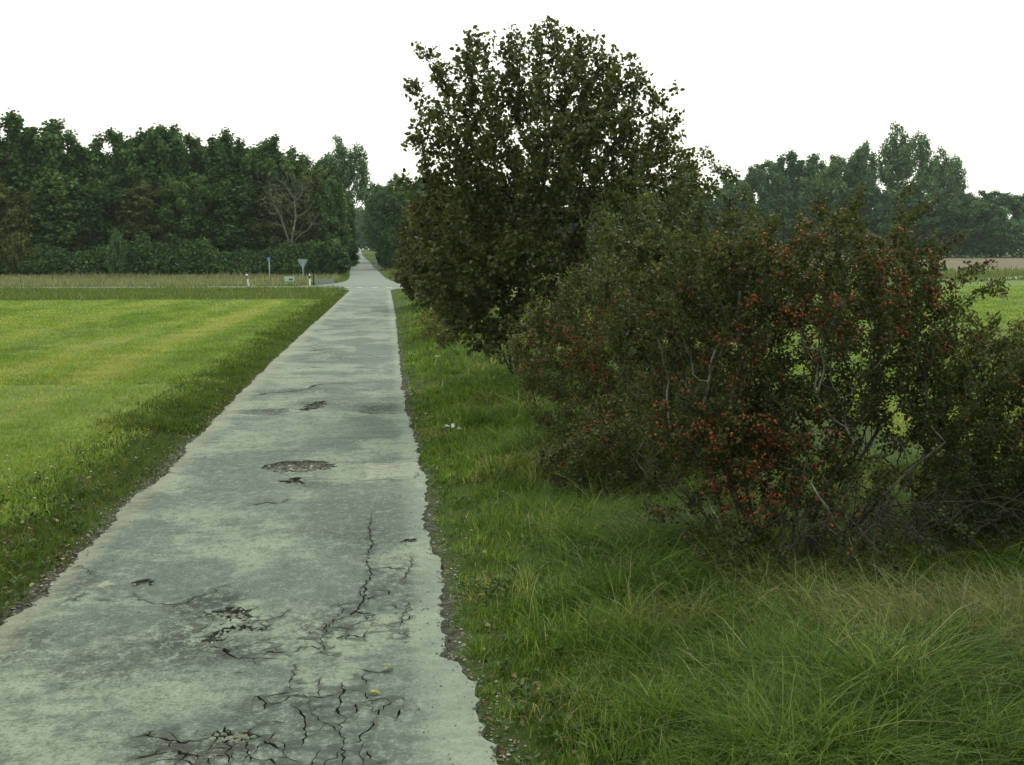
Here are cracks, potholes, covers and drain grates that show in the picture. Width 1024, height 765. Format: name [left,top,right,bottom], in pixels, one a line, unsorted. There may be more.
pothole [262,460,337,473]
pothole [297,401,327,411]
crack [134,517,413,673]
crack [135,665,405,765]
